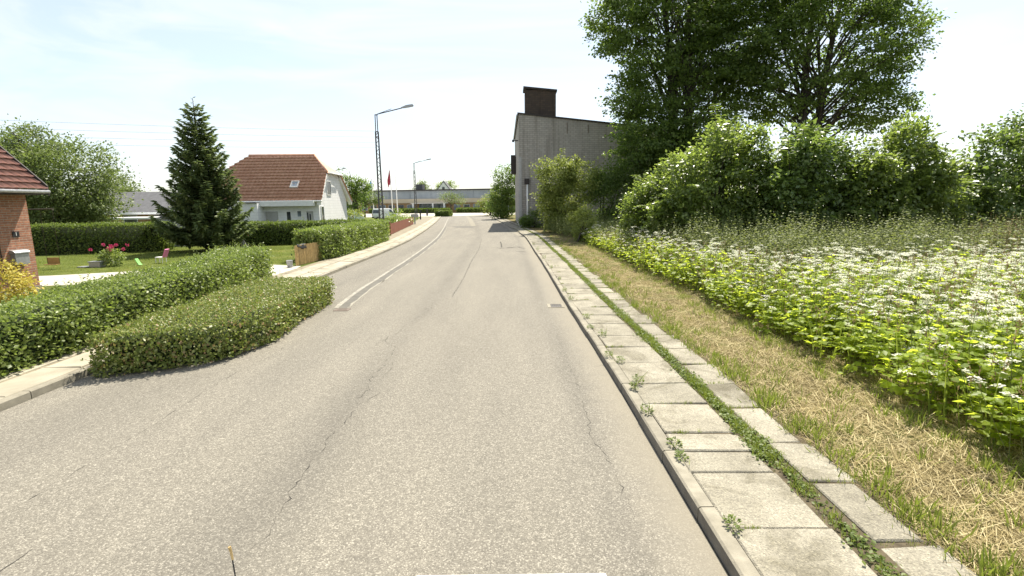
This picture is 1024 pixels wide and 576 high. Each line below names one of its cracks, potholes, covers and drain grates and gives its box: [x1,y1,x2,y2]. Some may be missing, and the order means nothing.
crack [254,312,425,546]
